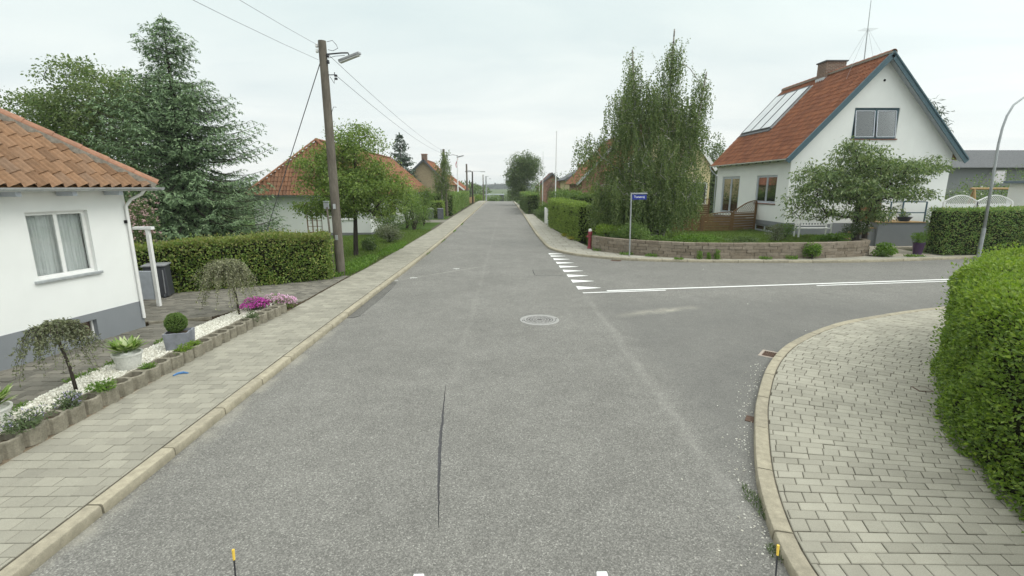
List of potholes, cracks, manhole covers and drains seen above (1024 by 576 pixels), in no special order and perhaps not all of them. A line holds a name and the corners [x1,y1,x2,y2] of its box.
manhole cover [520,315,559,325]
crack [437,388,446,527]
drain grate [758,350,778,358]
